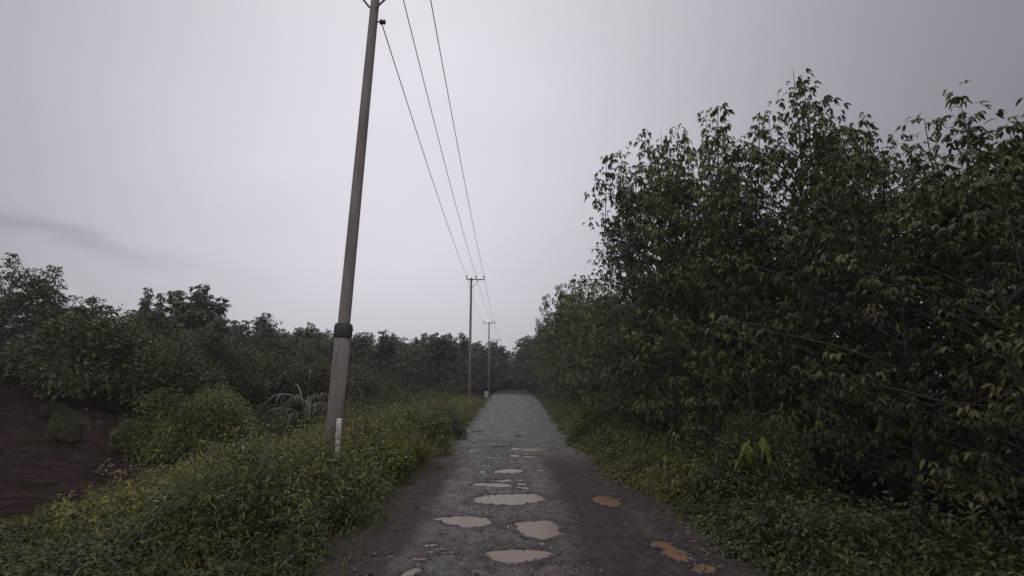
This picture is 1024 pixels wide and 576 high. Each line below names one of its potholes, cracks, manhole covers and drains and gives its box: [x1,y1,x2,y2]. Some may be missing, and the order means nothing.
pothole [432,515,493,527]
pothole [591,496,621,507]
pothole [485,548,554,563]
pothole [400,567,422,576]
pothole [692,564,717,573]
pothole [499,519,565,540]
pothole [648,540,691,562]
pothole [471,492,546,505]
